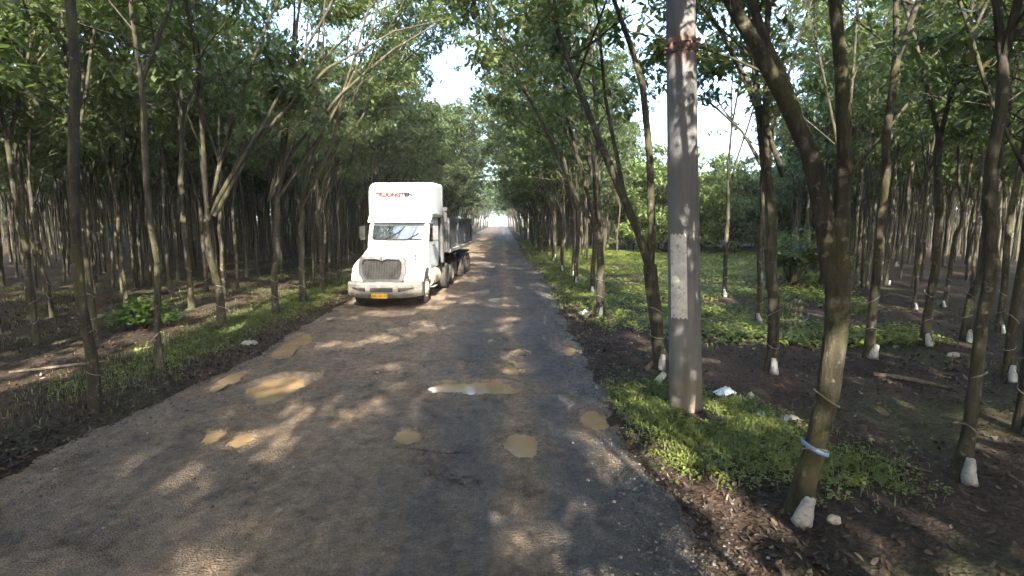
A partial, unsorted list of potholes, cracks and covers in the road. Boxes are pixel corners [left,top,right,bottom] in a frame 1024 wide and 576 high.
pothole [413,377,536,397]
pothole [265,333,320,360]
pothole [556,345,582,357]
pothole [203,369,251,394]
pothole [492,429,550,462]
pothole [382,423,433,448]
pothole [214,429,264,453]
pothole [505,348,538,358]
pothole [222,369,320,410]
pothole [188,427,235,448]
pothole [569,403,619,434]
pothole [492,361,529,377]
